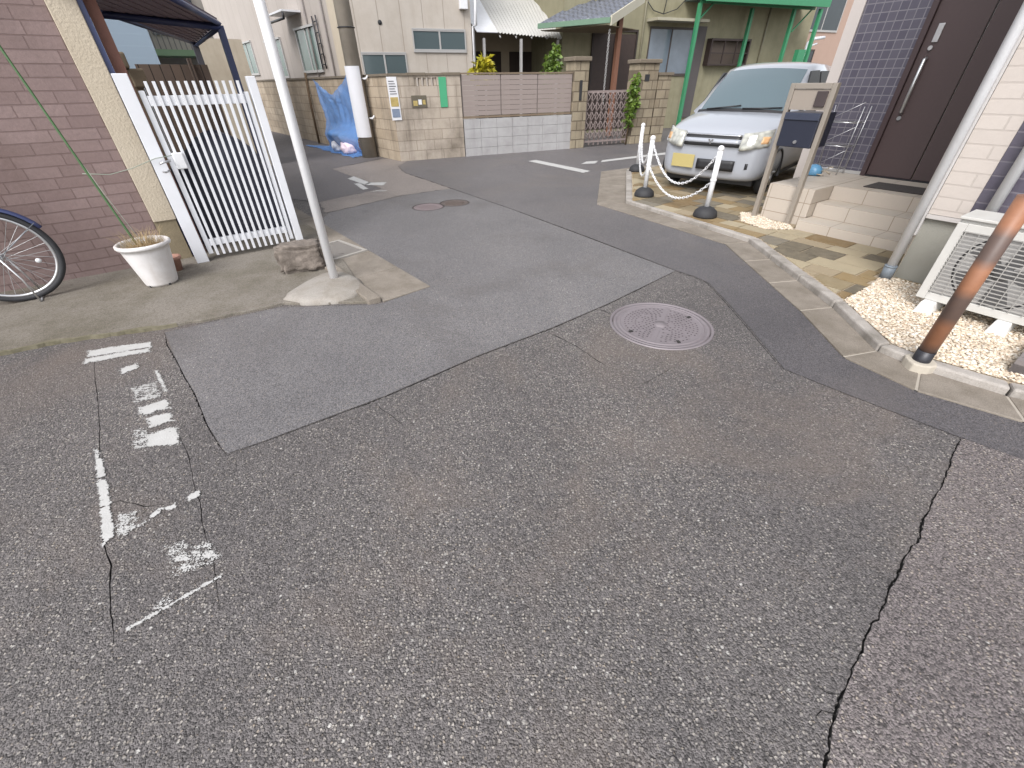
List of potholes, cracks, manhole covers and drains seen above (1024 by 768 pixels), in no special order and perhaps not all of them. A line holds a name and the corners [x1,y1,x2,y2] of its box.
crack [815,439,961,768]
manhole cover [440,199,470,207]
manhole cover [412,203,445,211]
crack [171,421,219,603]
crack [94,357,162,643]
manhole cover [610,302,714,350]
